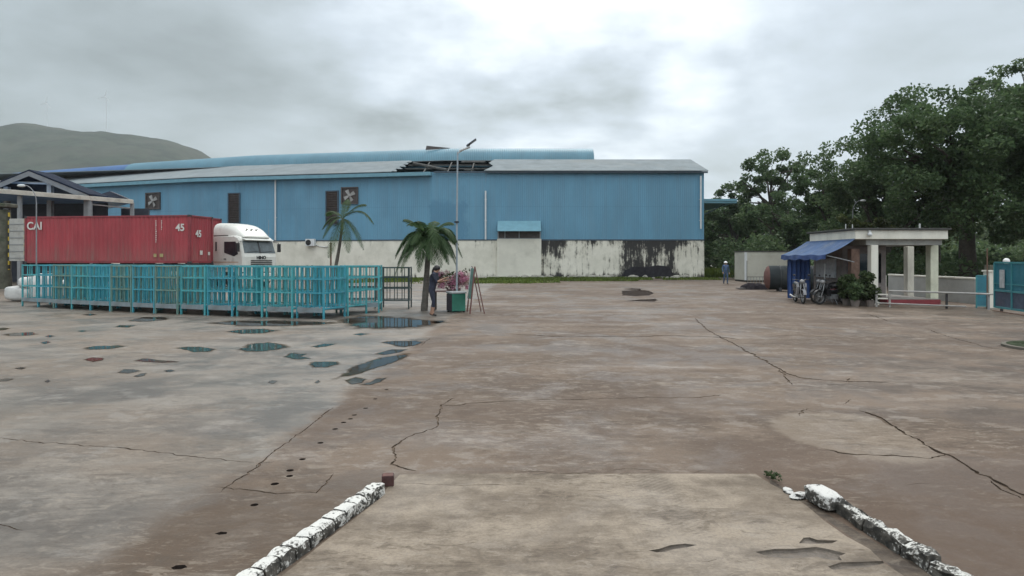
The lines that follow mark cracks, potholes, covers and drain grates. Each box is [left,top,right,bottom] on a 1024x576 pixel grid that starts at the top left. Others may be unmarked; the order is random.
crack [390,395,719,486]
crack [222,474,333,494]
pothole [649,544,694,552]
pothole [757,547,845,560]
crack [695,318,1024,499]
